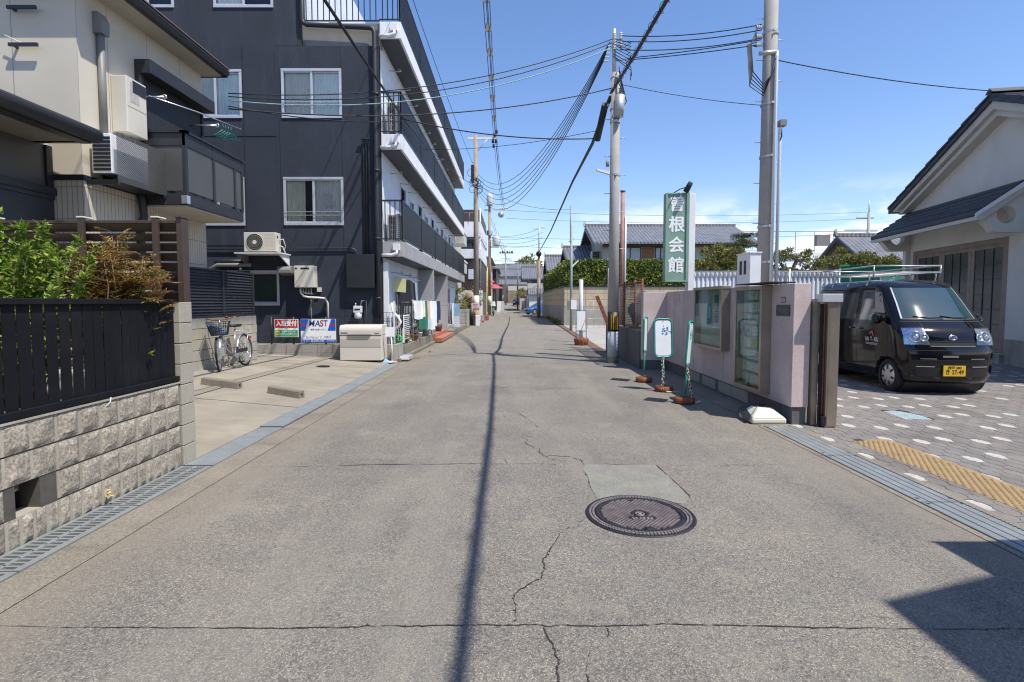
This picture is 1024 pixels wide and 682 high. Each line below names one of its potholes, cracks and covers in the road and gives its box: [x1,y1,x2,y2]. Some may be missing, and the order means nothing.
drain grate [103,466,212,507]
crack [4,623,1021,682]
drain grate [0,506,138,574]
manhole cover [585,495,697,538]
crack [513,518,586,613]
drain grate [0,572,17,583]
